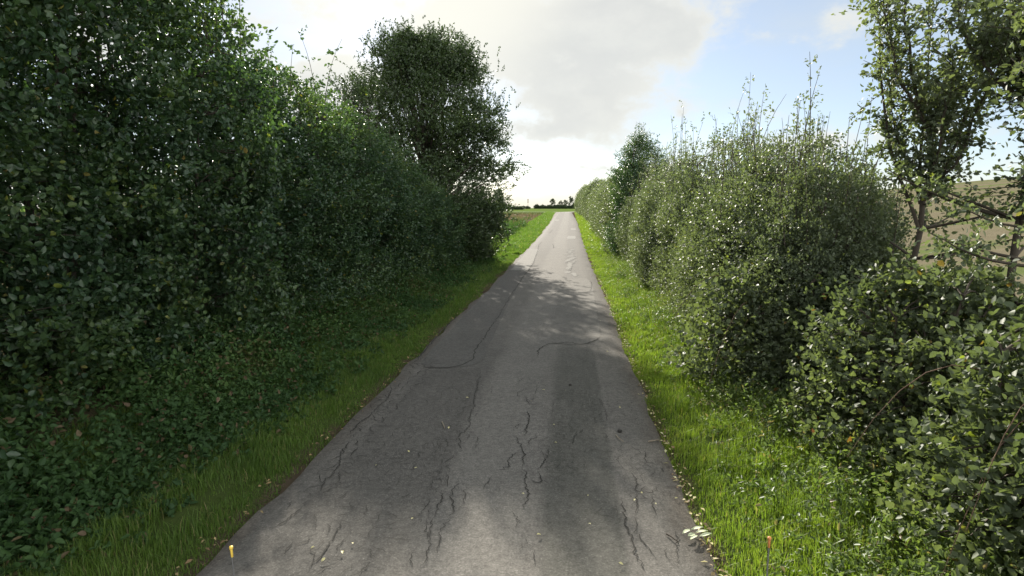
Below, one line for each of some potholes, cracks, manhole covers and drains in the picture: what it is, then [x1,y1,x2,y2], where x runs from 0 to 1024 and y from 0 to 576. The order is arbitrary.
crack [484,348,682,565]
crack [277,357,497,576]
